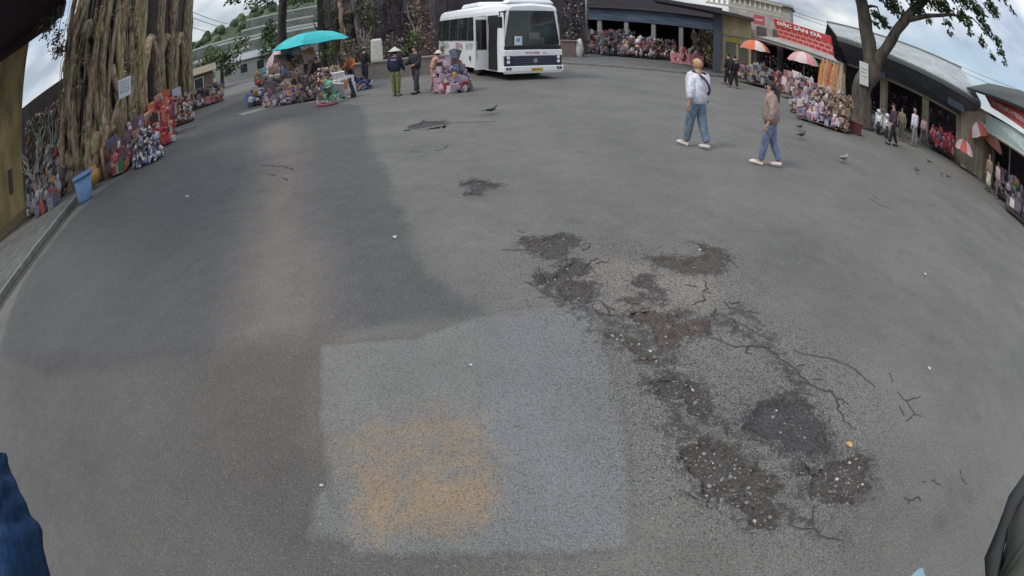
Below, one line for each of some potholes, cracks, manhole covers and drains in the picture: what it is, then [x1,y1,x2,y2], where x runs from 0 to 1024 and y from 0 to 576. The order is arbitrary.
pothole [612,303,725,365]
pothole [786,446,883,512]
pothole [662,429,798,541]
pothole [405,121,451,131]
crack [682,490,711,508]
pothole [641,241,741,279]
pothole [625,368,722,430]
pothole [727,386,846,475]
pothole [510,232,591,267]
crack [903,480,941,504]
crack [686,255,922,430]
